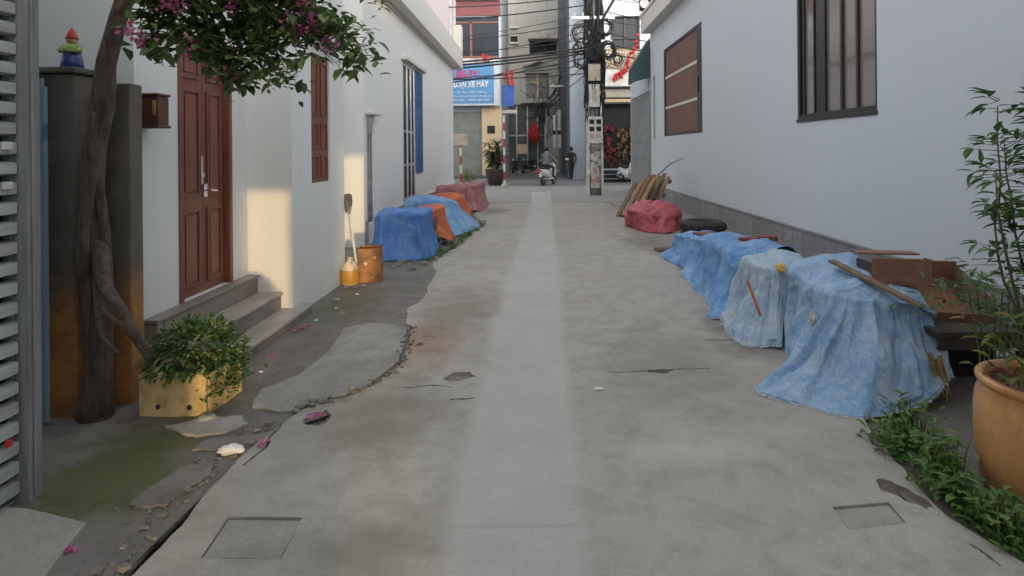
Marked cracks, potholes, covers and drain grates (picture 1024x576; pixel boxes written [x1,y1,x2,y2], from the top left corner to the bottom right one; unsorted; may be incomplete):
pothole [445,372,476,381]
manhole cover [203,520,300,559]
pothole [876,478,933,509]
crack [300,327,475,411]
manhole cover [835,505,904,530]
crack [970,544,1001,566]
